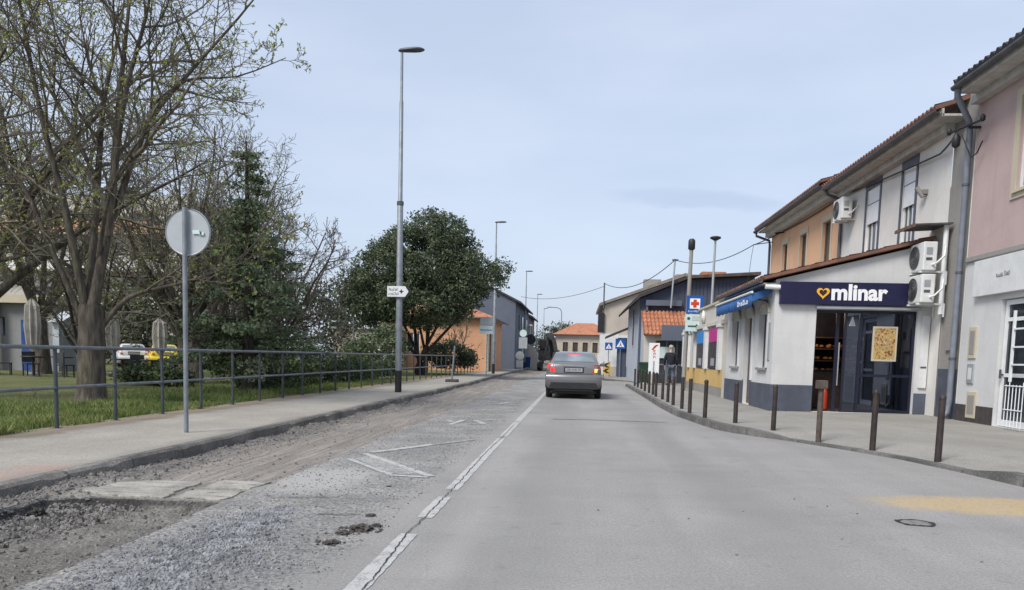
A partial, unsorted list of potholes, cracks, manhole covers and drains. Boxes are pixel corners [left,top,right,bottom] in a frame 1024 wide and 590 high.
pothole [0,496,222,590]
